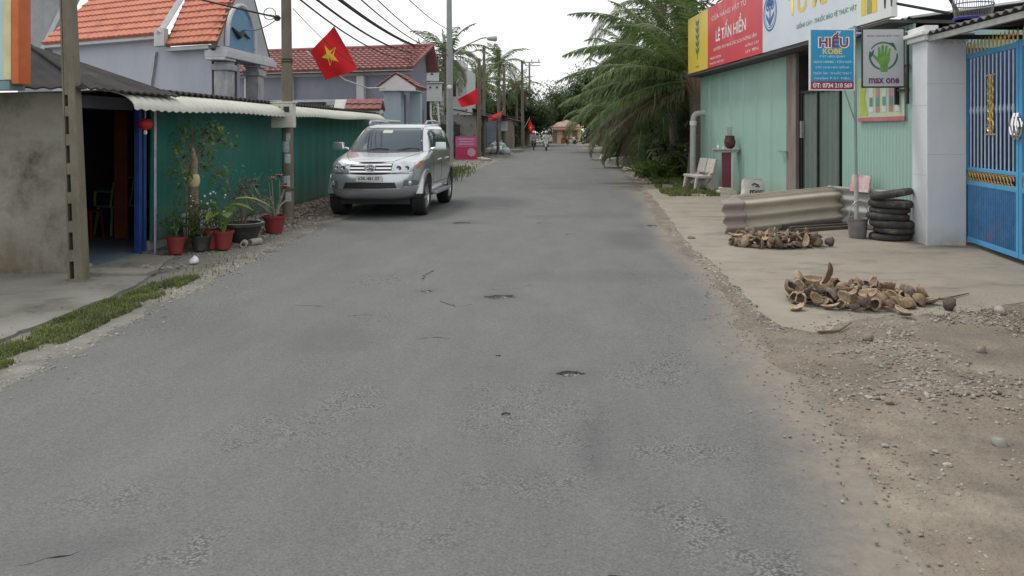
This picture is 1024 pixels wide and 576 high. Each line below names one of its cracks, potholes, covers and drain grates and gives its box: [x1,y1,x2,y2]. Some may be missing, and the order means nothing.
crack [14,552,77,567]
